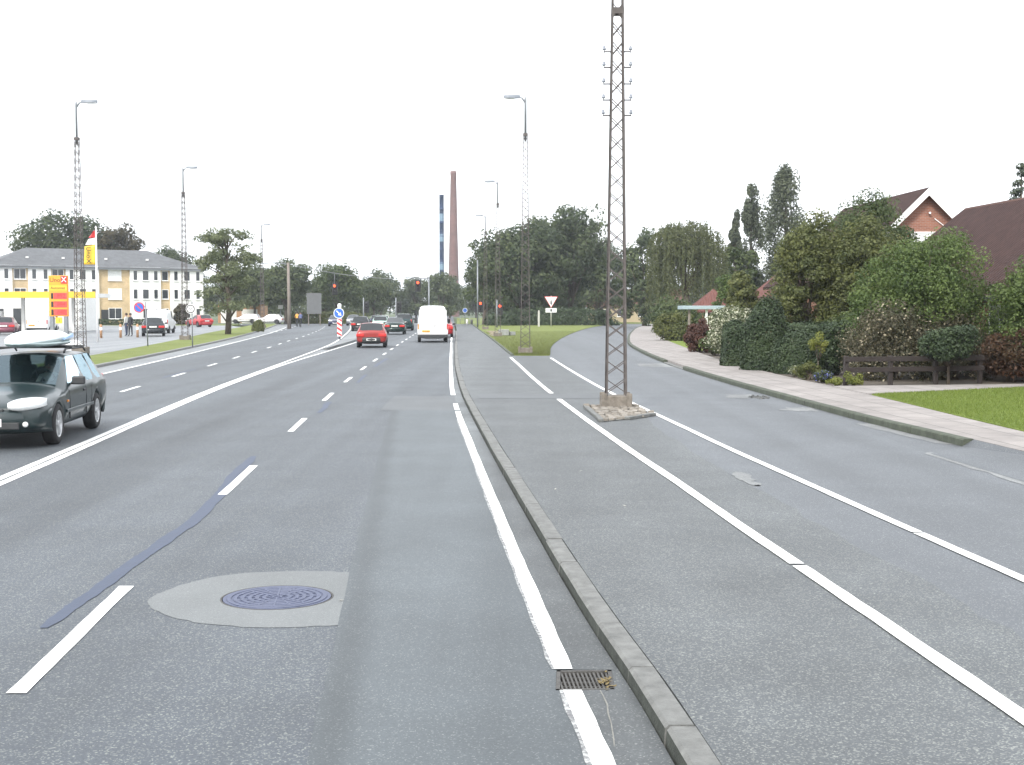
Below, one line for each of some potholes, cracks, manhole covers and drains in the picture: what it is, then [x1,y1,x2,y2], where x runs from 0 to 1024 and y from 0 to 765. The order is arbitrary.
drain grate [556,670,617,690]
manhole cover [147,571,349,628]
